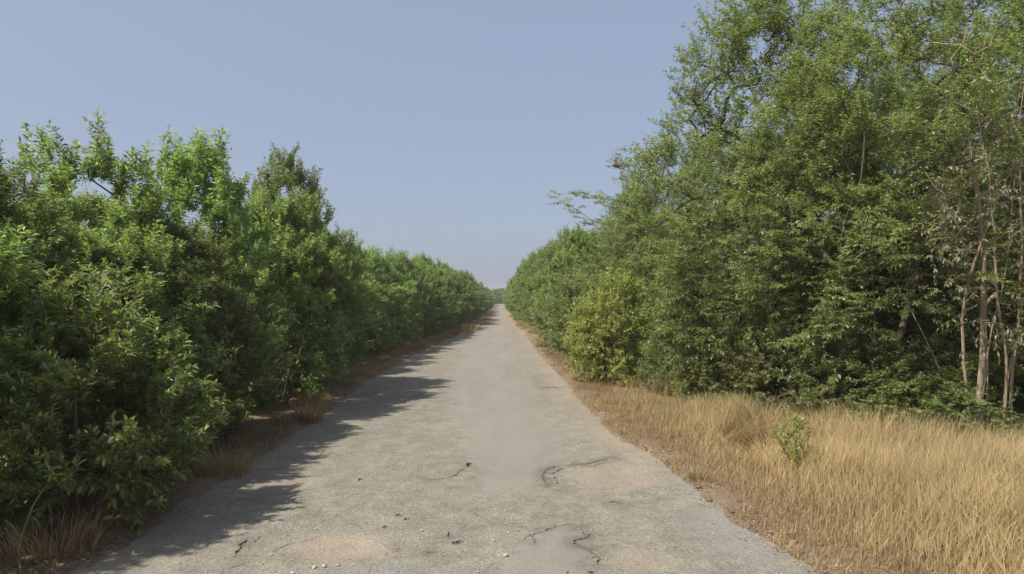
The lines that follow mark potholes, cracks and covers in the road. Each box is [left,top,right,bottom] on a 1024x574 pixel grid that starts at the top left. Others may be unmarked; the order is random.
crack [524,525,601,567]
crack [542,459,605,489]
crack [231,535,266,568]
